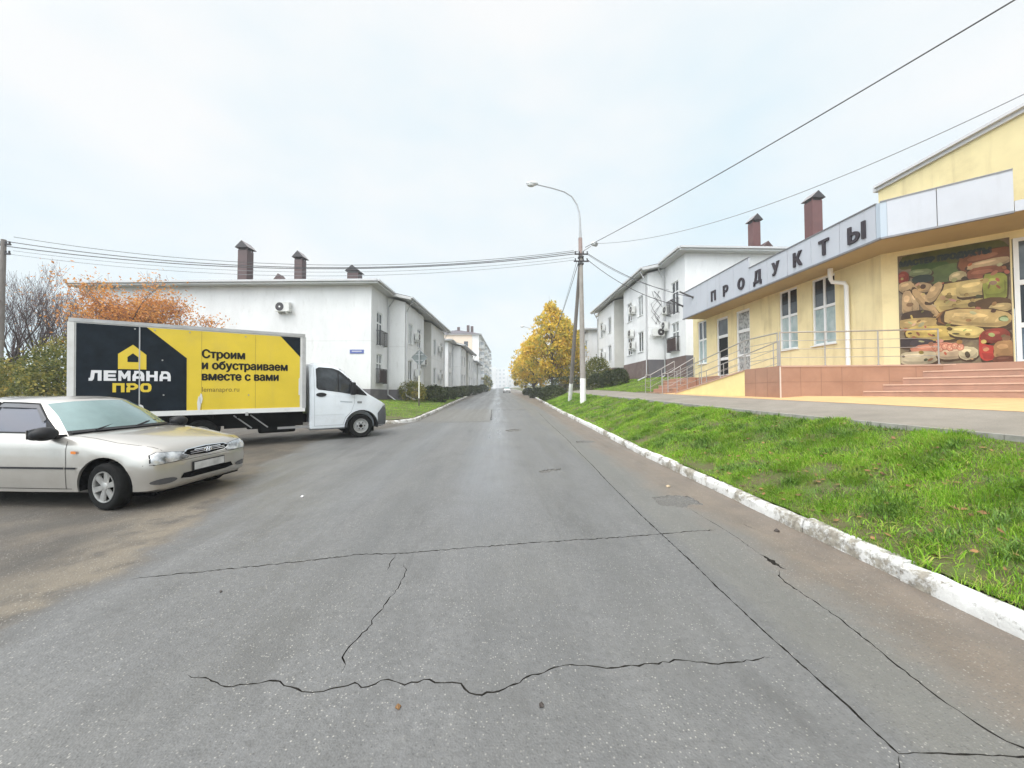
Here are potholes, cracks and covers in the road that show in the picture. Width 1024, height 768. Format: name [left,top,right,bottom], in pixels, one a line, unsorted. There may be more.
crack [134,513,1024,749]
